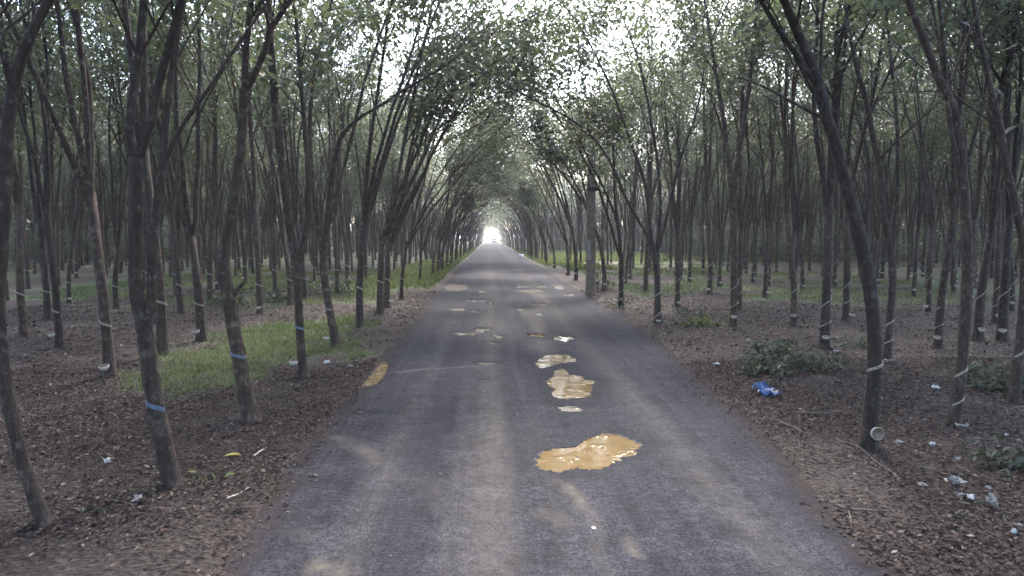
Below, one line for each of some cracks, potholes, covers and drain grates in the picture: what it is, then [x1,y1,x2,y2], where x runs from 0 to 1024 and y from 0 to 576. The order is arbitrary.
pothole [361,361,388,387]
pothole [546,368,596,399]
crack [389,366,467,374]
pothole [533,433,643,473]
pothole [535,354,576,368]
